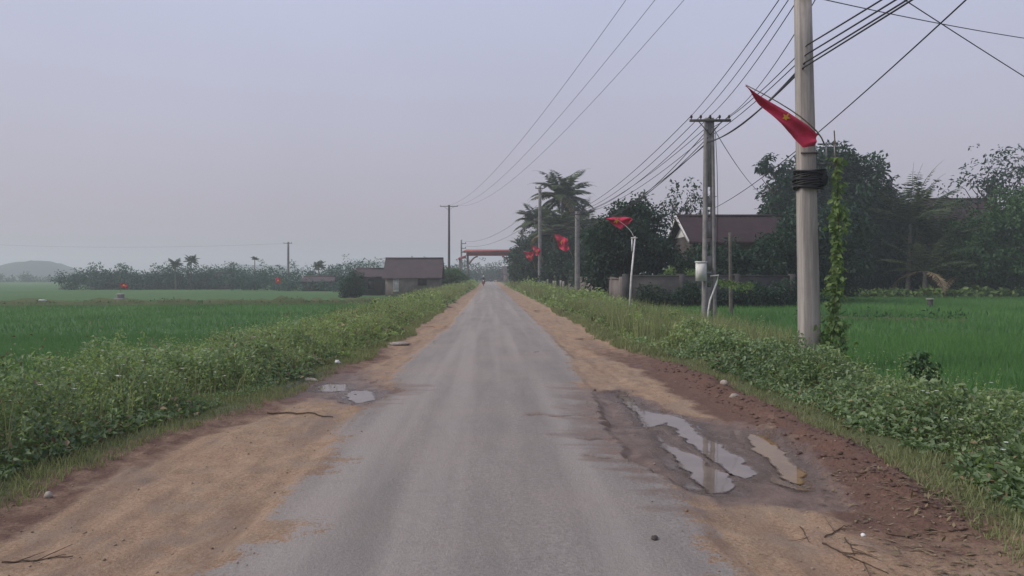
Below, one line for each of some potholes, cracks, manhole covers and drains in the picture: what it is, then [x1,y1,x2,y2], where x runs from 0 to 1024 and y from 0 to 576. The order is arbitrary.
pothole [589,389,865,513]
pothole [275,371,408,407]
